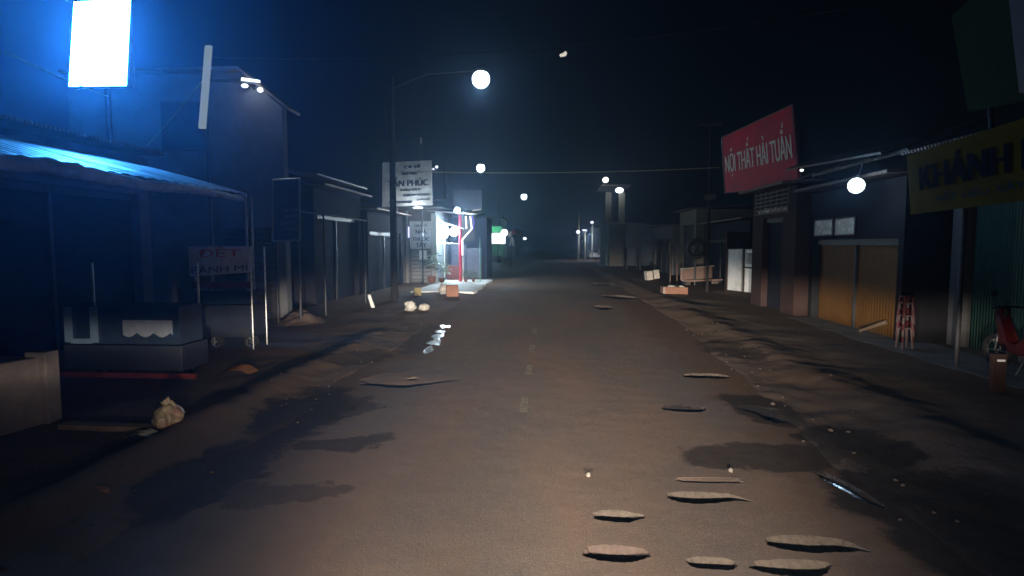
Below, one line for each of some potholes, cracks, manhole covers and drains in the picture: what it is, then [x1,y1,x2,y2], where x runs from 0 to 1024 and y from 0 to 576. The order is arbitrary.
pothole [765,535,872,553]
pothole [666,491,755,504]
pothole [582,544,651,563]
pothole [748,559,833,576]
pothole [592,510,646,523]
pothole [358,368,461,388]
pothole [685,556,738,570]
